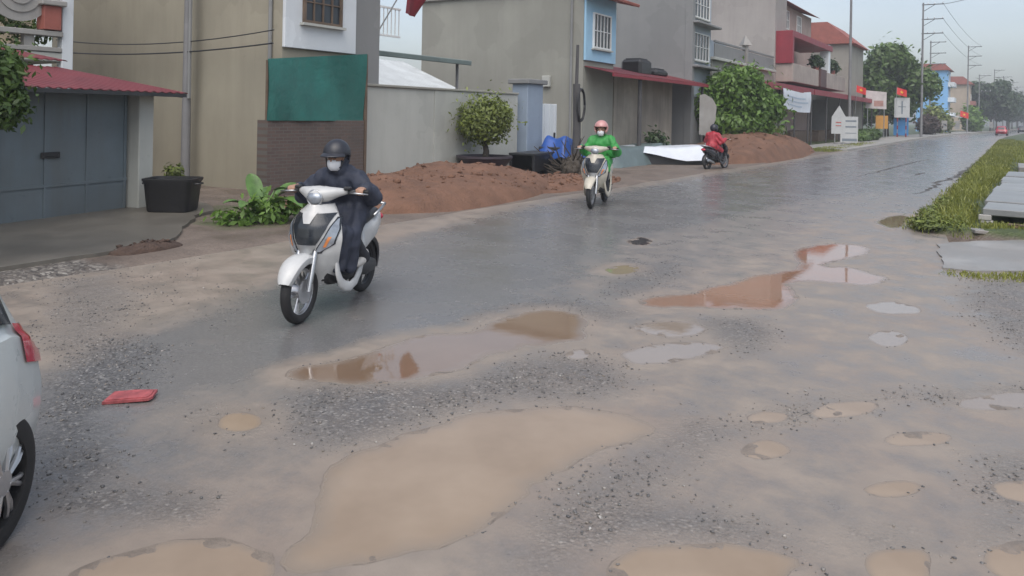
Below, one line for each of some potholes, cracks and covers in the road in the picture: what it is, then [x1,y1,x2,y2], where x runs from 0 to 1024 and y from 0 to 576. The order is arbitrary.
pothole [866,302,922,314]
pothole [864,546,931,576]
pothole [956,393,1024,410]
pothole [68,537,275,576]
pothole [868,330,908,348]
pothole [278,405,656,575]
pothole [630,320,709,338]
pothole [740,440,791,460]
pothole [285,309,593,385]
pothole [604,265,640,275]
pothole [626,237,653,246]
pothole [884,431,952,446]
